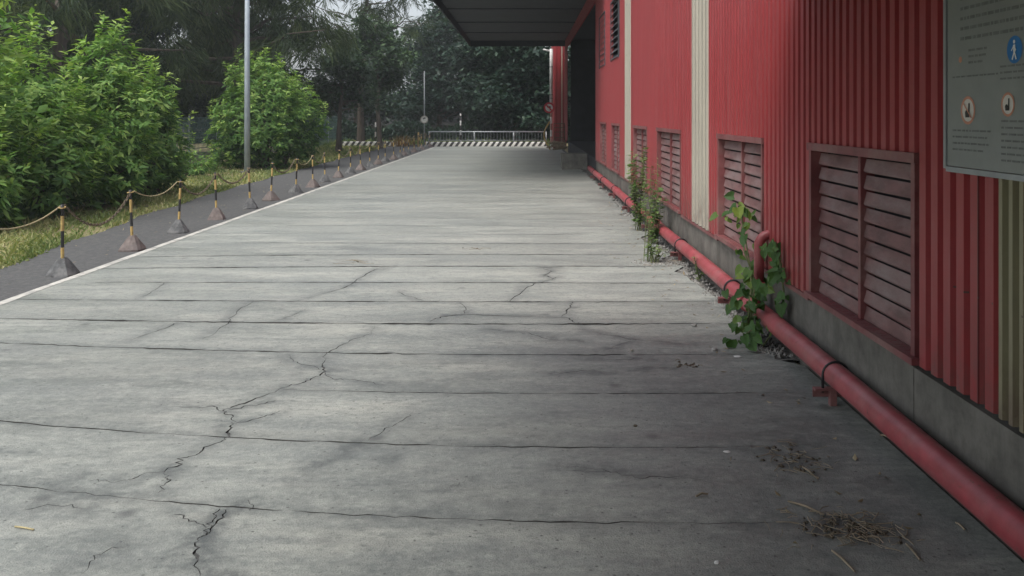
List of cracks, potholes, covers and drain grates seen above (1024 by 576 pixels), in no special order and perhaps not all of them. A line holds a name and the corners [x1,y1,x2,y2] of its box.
crack [91,327,375,492]
crack [435,267,666,373]
crack [174,500,254,575]
